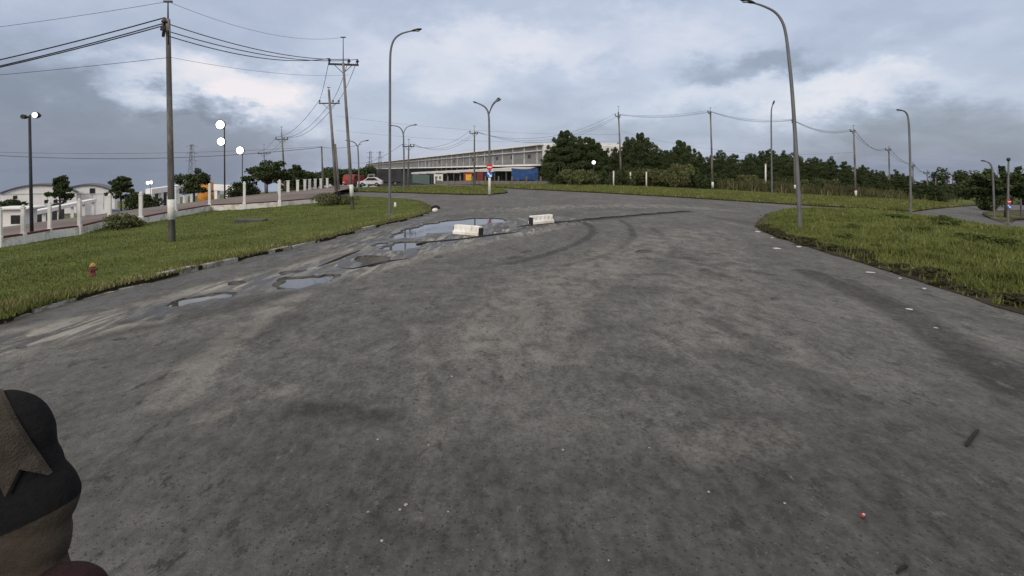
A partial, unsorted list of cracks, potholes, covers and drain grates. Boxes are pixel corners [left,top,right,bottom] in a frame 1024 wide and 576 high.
pothole [389,218,508,239]
pothole [272,274,341,290]
pothole [354,255,391,267]
pothole [379,241,433,251]
pothole [166,292,238,307]
